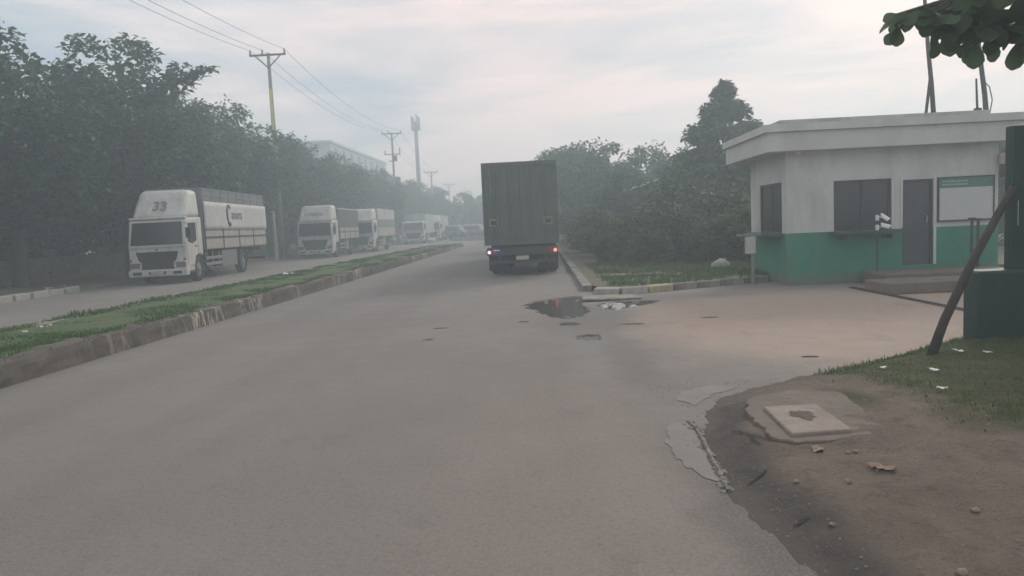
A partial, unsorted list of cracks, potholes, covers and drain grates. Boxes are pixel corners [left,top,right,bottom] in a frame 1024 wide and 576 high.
pothole [522,296,590,319]
manhole cover [745,390,880,445]
